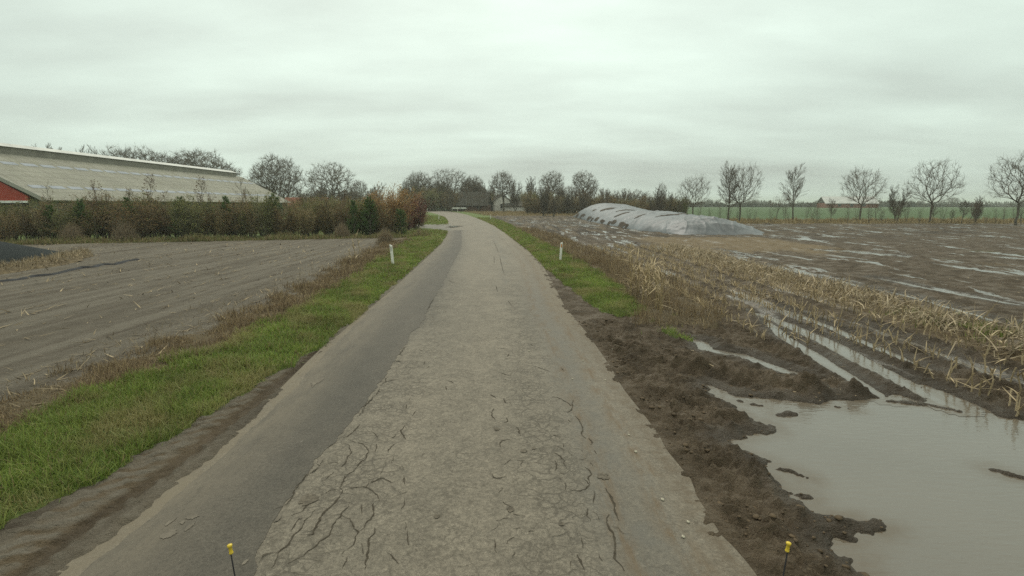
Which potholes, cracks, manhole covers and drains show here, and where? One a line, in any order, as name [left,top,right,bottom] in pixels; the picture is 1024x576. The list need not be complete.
crack [489,337,531,555]
crack [259,345,425,568]
crack [553,396,625,571]
